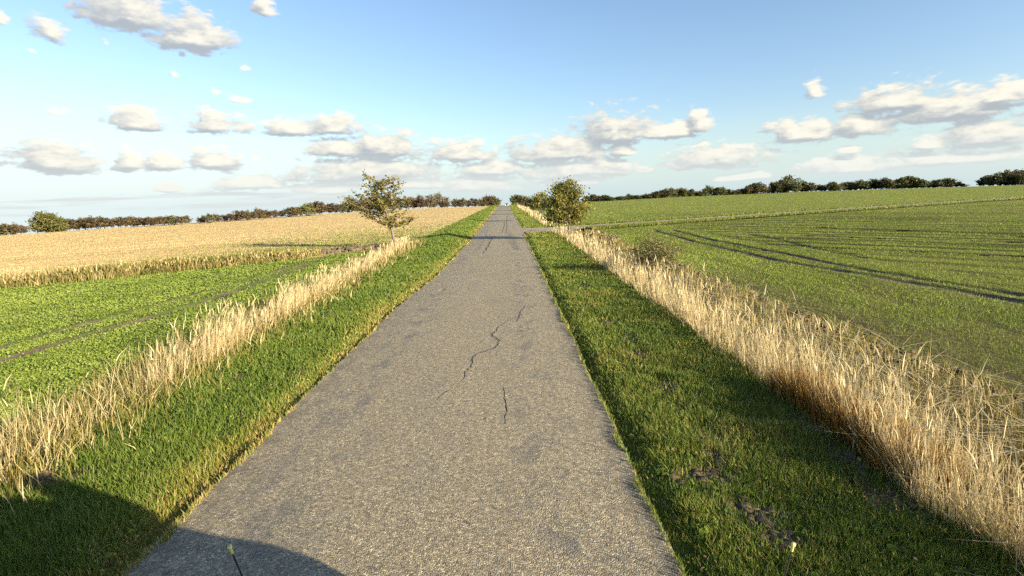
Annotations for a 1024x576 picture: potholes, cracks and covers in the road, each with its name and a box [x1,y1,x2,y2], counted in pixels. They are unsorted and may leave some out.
crack [435,306,525,424]
crack [482,214,508,254]
